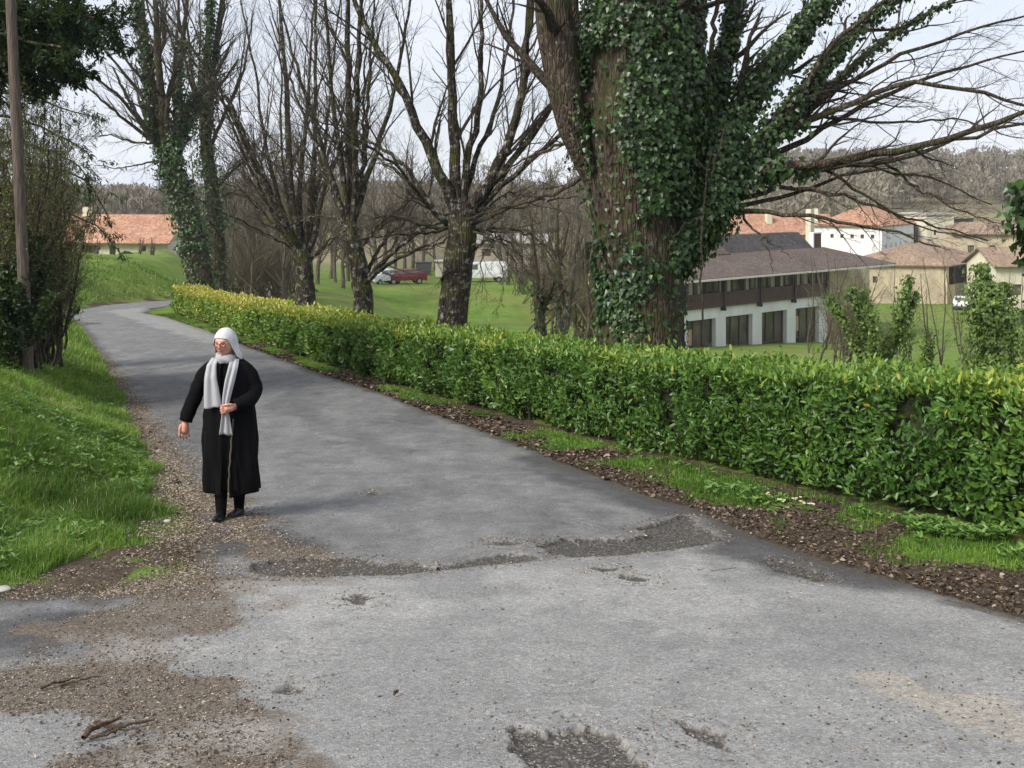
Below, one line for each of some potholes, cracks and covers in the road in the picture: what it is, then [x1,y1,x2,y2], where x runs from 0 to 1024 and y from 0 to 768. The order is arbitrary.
pothole [575,564,631,575]
pothole [237,554,443,580]
pothole [486,719,675,768]
pothole [750,554,849,586]
pothole [524,513,737,561]
pothole [652,710,757,761]
pothole [604,571,666,585]
pothole [431,551,551,573]
